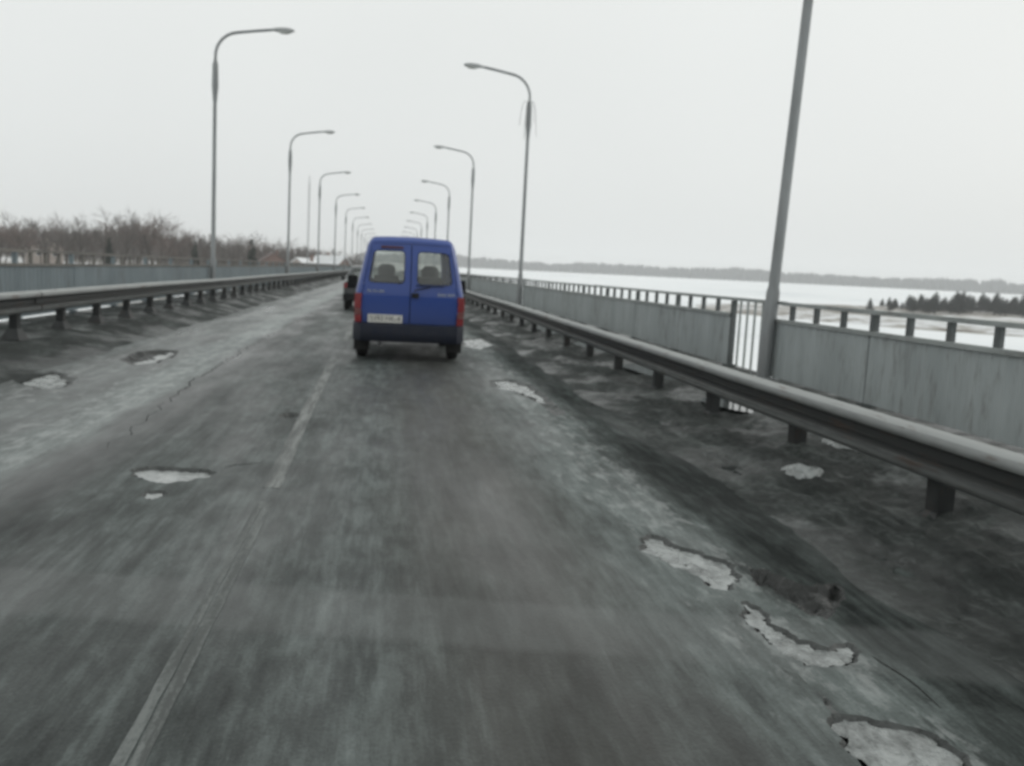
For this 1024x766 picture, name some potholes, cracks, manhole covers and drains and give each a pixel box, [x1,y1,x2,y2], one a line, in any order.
pothole [488,379,566,416]
pothole [819,692,972,766]
pothole [638,534,743,591]
crack [107,311,318,448]
pothole [462,338,495,350]
pothole [738,600,863,667]
pothole [12,370,77,389]
pothole [119,350,179,365]
pothole [141,490,170,500]
pothole [129,465,217,483]
